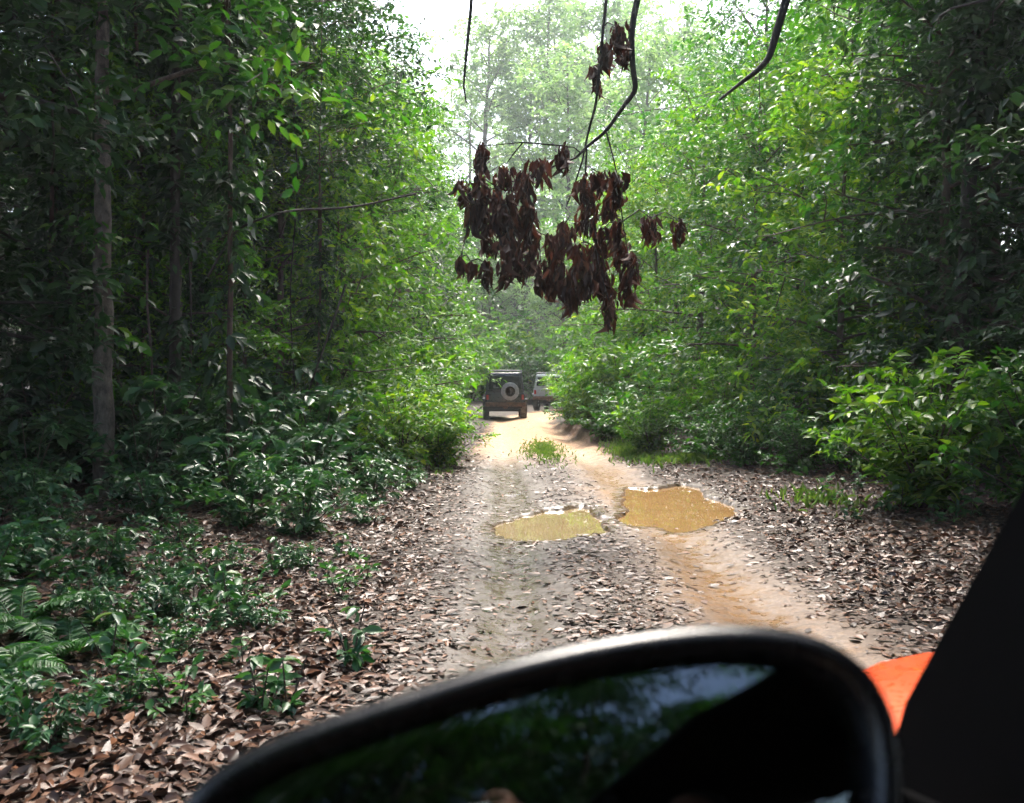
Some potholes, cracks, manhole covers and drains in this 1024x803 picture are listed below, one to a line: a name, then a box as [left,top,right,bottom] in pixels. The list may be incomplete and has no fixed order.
pothole [612,482,752,535]
pothole [477,502,619,543]
